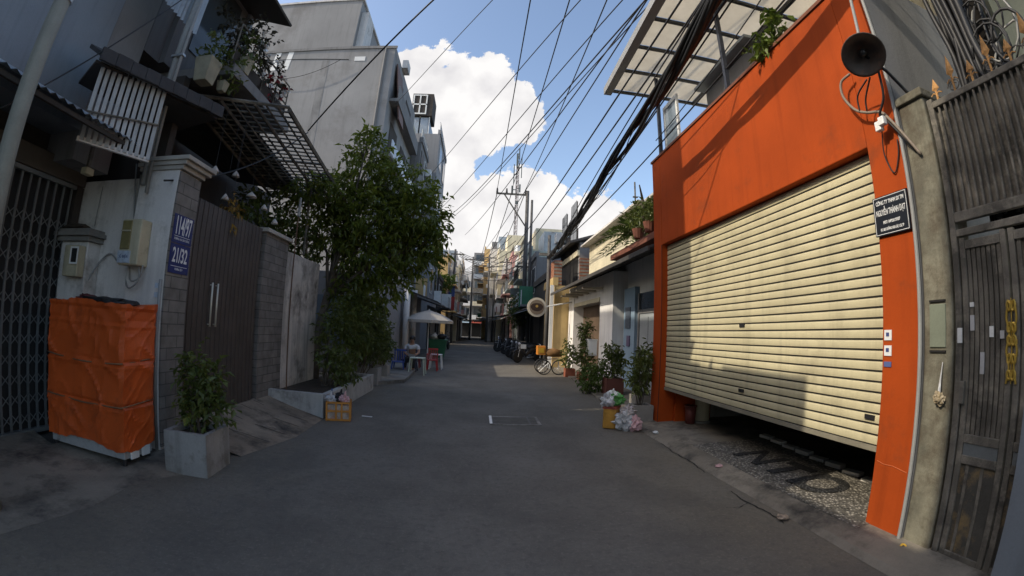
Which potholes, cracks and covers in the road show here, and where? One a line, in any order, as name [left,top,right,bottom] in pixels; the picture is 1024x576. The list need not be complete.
crack [726,491,784,523]
manhole cover [489,415,542,426]
